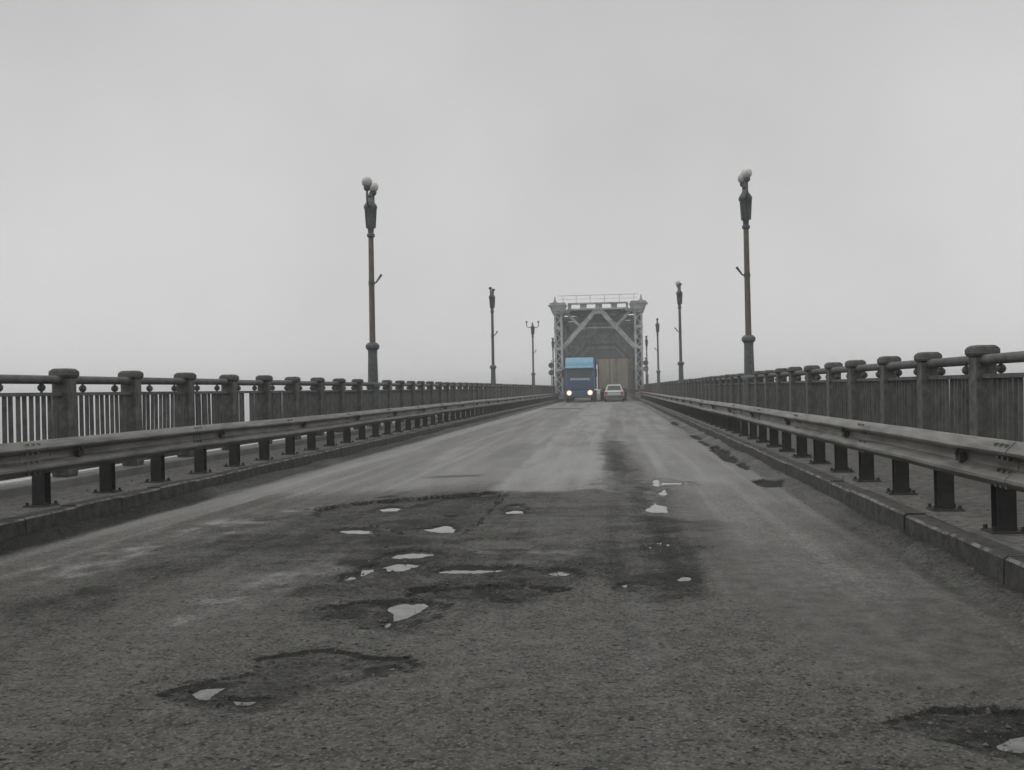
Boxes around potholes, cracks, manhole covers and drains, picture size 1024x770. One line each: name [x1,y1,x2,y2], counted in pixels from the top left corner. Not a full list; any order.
pothole [500,503,531,517]
pothole [709,446,737,463]
pothole [317,598,455,631]
pothole [326,526,385,539]
pothole [423,564,584,583]
pothole [753,479,783,488]
pothole [304,491,509,537]
pothole [337,548,448,585]
pothole [664,574,704,587]
pothole [638,501,676,516]
pothole [154,648,421,714]
